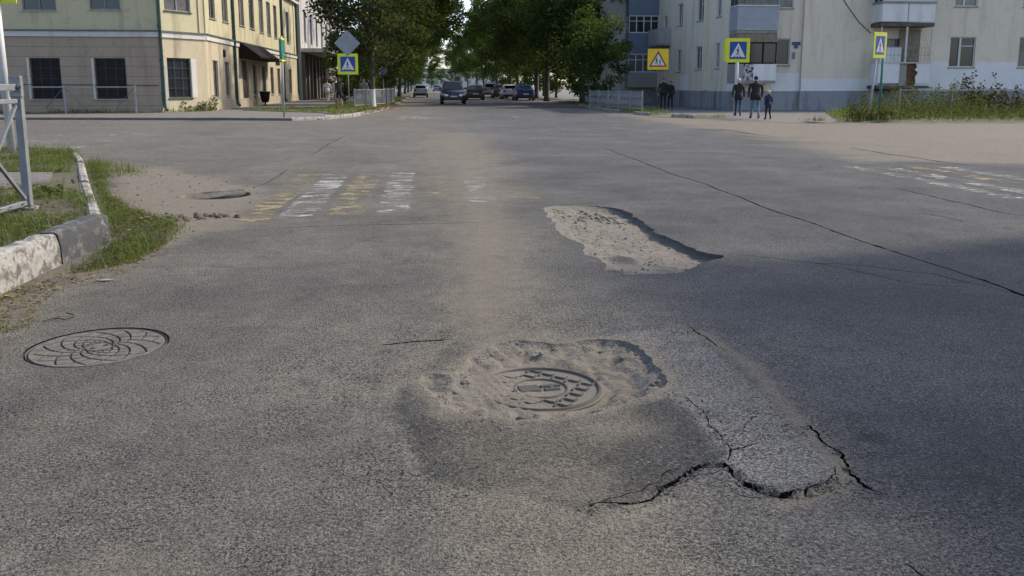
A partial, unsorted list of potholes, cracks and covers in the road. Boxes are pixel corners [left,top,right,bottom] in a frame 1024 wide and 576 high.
pothole [419,339,668,420]
manhole cover [196,189,246,199]
pothole [543,205,724,274]
crack [607,148,1024,296]
crack [580,393,887,510]
manhole cover [482,367,604,412]
manhole cover [22,329,170,368]
